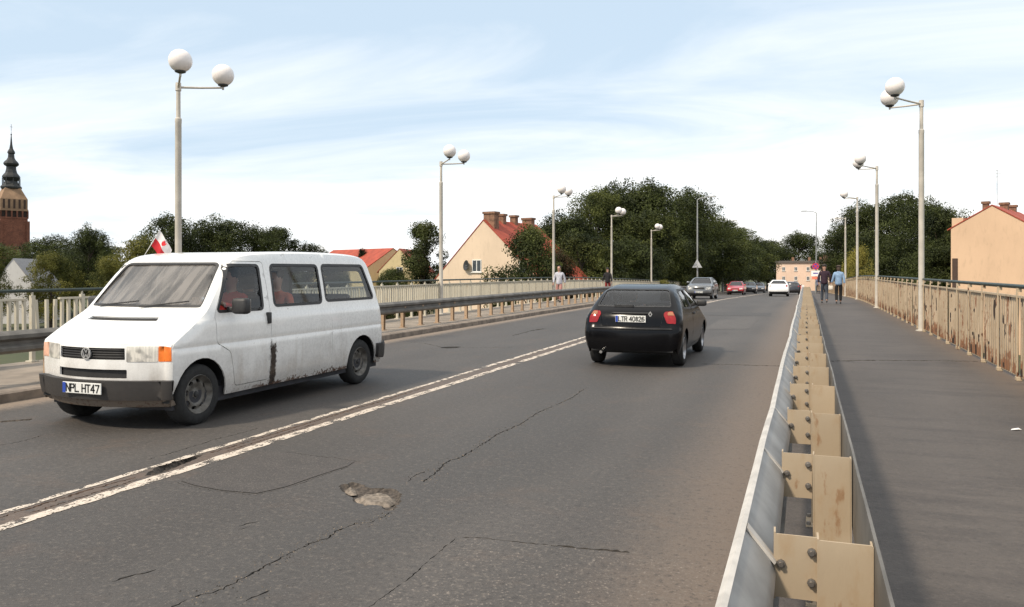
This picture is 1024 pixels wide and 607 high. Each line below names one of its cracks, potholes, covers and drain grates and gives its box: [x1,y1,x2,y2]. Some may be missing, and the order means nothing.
pothole [145,454,203,476]
crack [398,390,582,485]
pothole [338,482,402,511]
crack [178,452,360,495]
crack [171,510,397,607]
